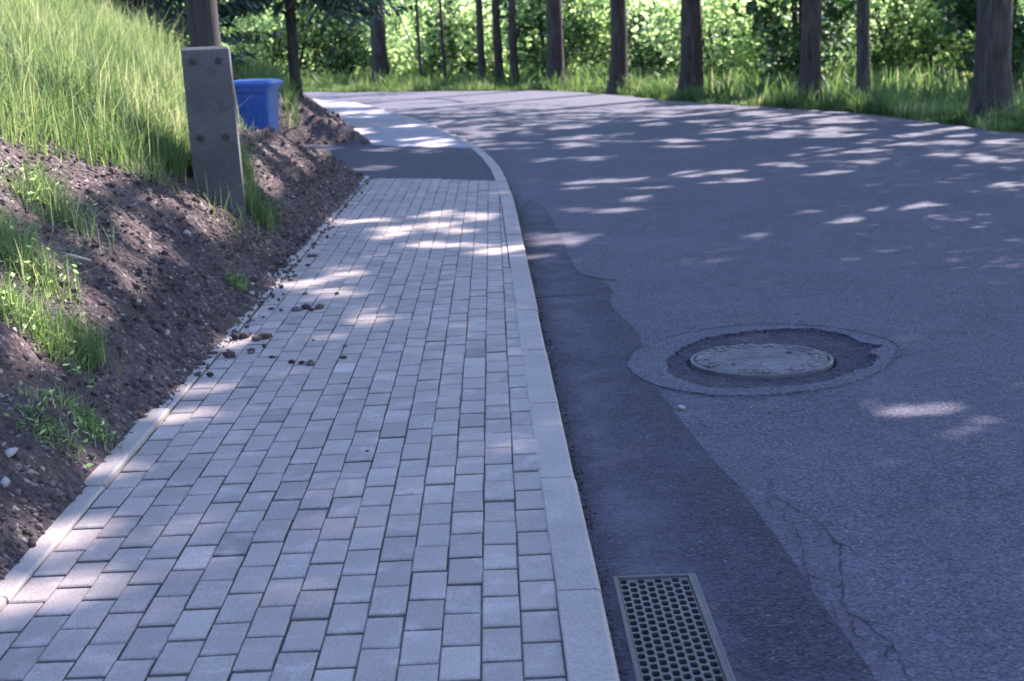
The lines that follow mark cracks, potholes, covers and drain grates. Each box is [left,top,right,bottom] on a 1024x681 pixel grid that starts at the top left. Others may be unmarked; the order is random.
manhole cover [690,343,833,380]
crack [766,477,911,681]
drain grate [612,573,736,681]
